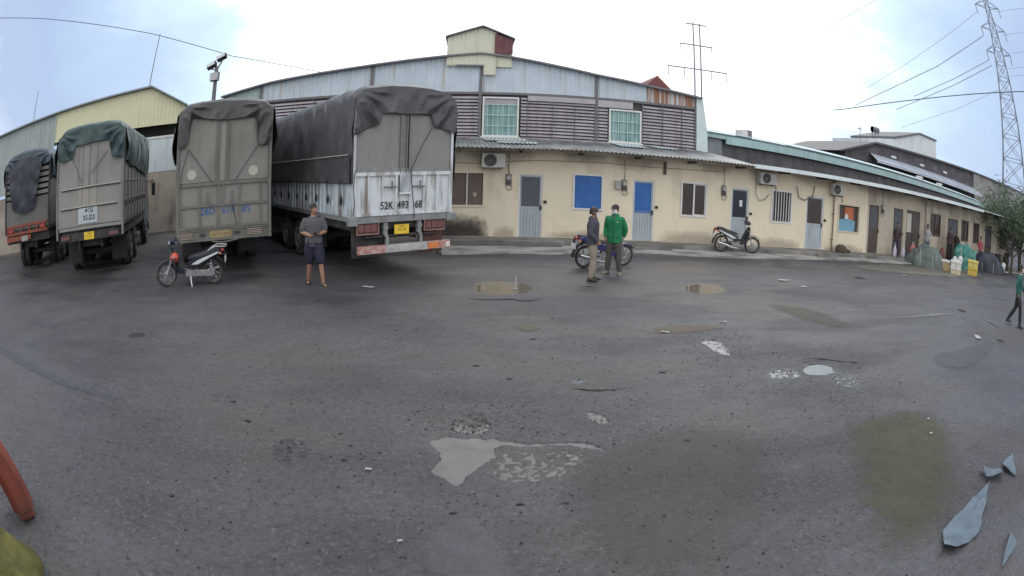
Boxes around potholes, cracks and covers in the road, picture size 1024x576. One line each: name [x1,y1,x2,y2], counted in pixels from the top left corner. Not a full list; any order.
crack [559,385,636,396]
pothole [463,280,544,297]
pothole [412,408,620,498]
pothole [752,359,877,393]
crack [788,356,866,366]
pothole [686,333,741,358]
pothole [675,282,734,296]
